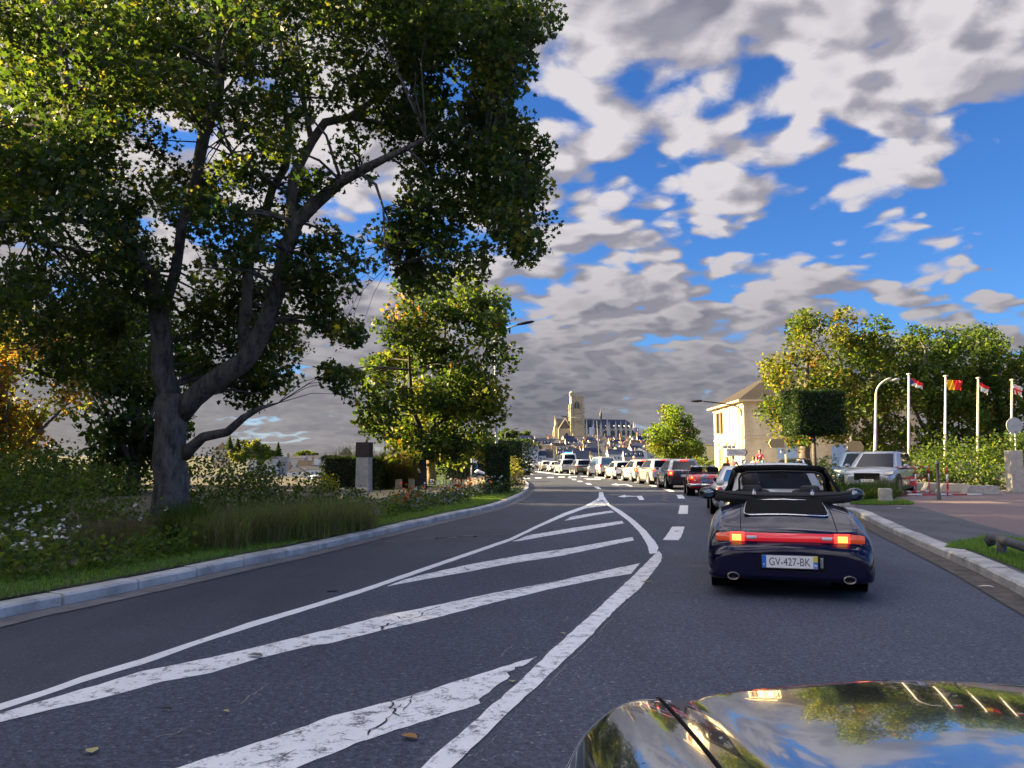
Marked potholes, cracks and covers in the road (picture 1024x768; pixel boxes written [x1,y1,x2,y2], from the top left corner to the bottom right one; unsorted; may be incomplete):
crack [299,607,438,646]
crack [367,686,437,735]
